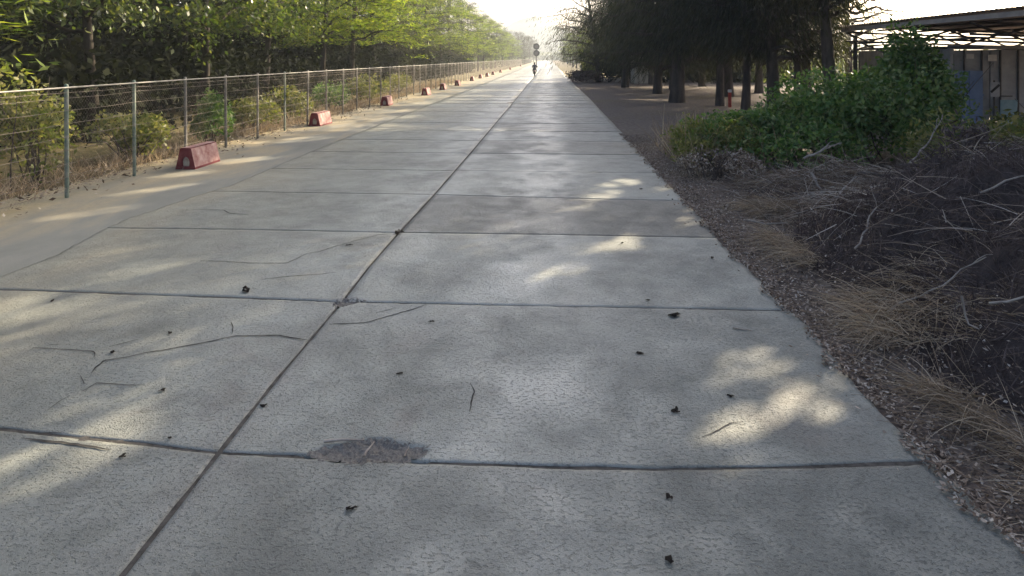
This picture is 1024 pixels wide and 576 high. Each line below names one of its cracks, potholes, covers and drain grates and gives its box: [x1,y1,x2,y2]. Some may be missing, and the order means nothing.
pothole [306,434,436,467]
crack [33,323,306,409]
crack [337,304,426,324]
